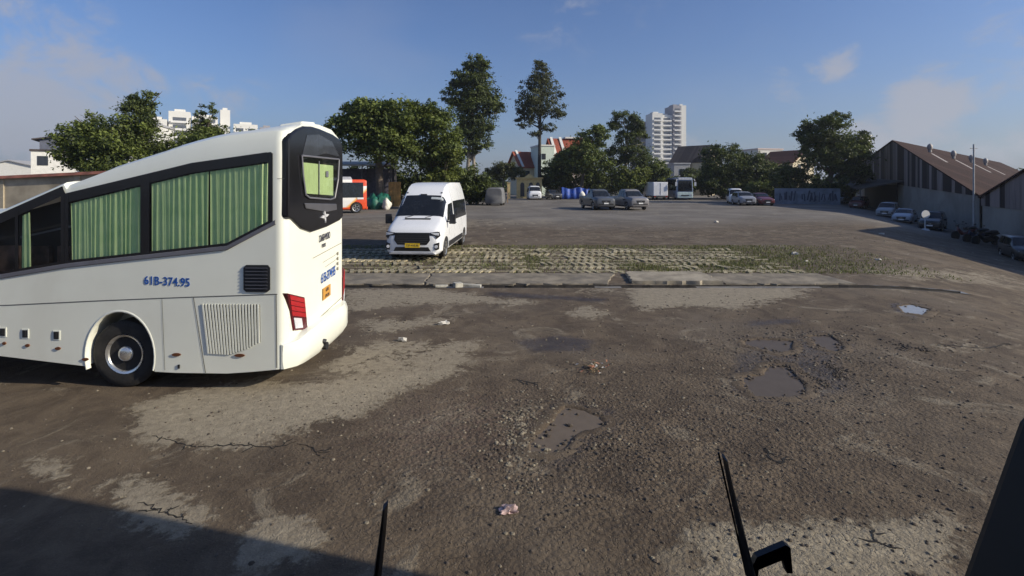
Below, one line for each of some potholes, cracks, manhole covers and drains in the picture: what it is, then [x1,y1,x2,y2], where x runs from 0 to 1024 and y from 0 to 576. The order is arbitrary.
pothole [723,359,825,407]
crack [138,502,192,524]
crack [859,529,903,552]
pothole [799,331,855,356]
pothole [513,402,618,467]
pothole [896,303,940,318]
crack [156,436,331,456]
pothole [734,335,810,357]
